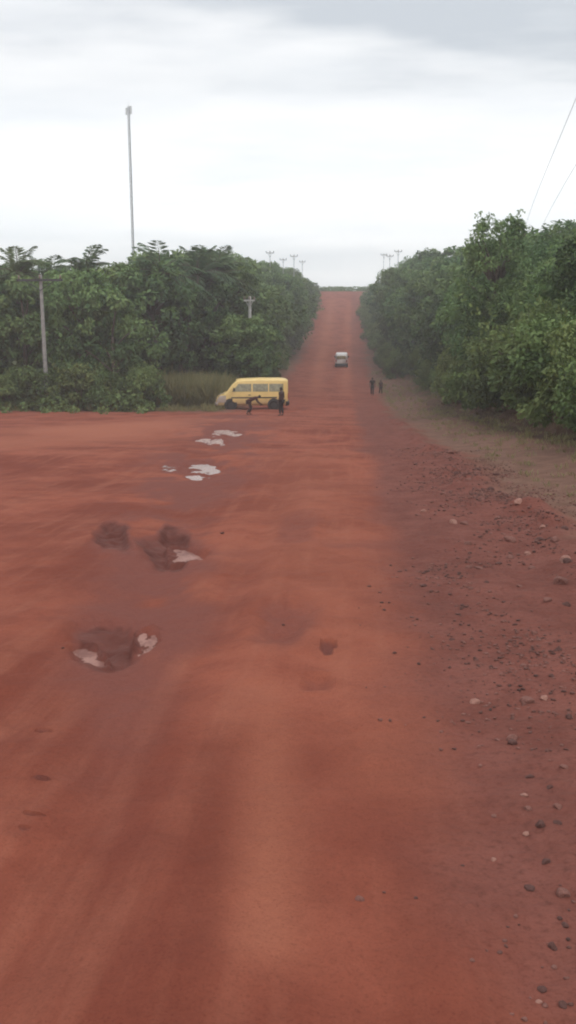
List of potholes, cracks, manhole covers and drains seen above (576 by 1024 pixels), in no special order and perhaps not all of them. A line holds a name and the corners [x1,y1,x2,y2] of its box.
pothole [90,519,135,554]
pothole [60,610,148,677]
pothole [132,524,194,574]
pothole [319,635,338,656]
pothole [194,422,250,446]
pothole [148,454,229,480]
